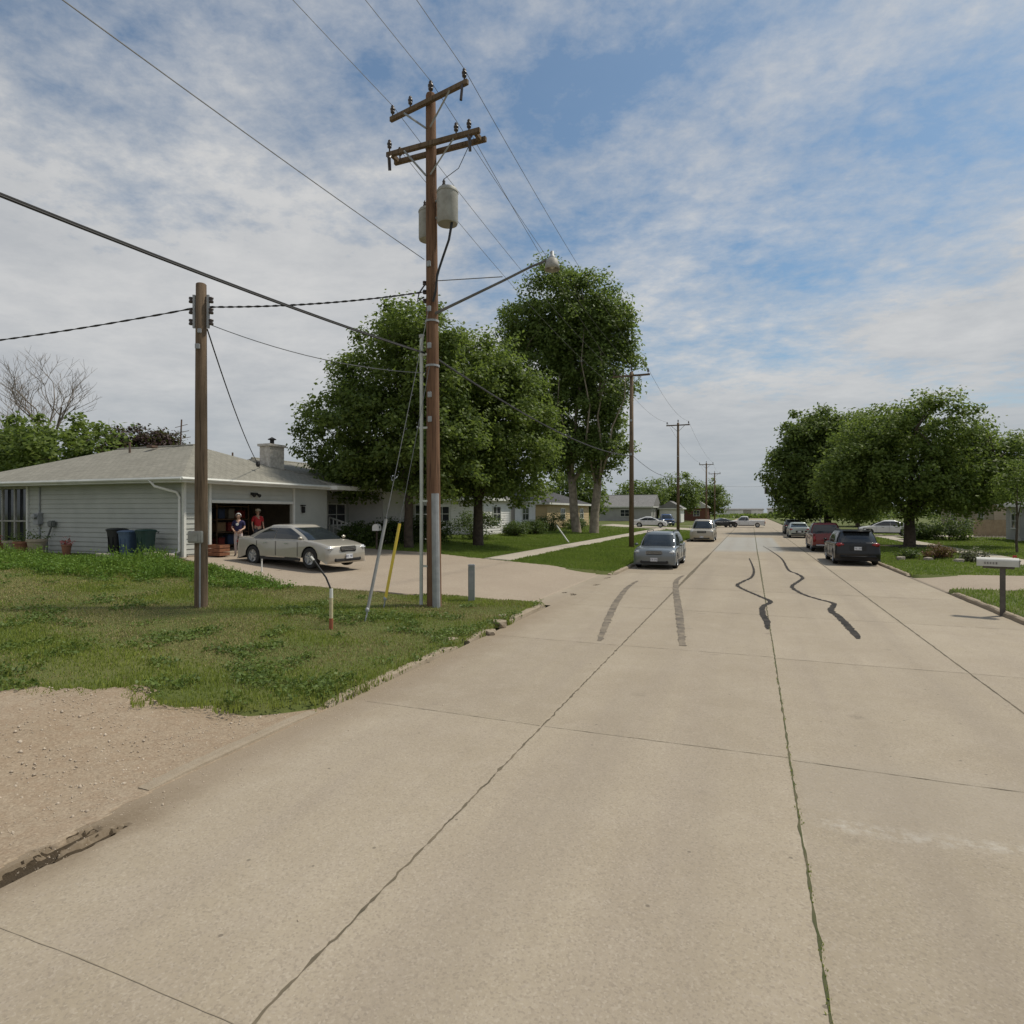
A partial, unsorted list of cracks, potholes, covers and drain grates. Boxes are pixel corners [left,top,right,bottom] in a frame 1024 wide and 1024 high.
pothole [0,826,127,888]
